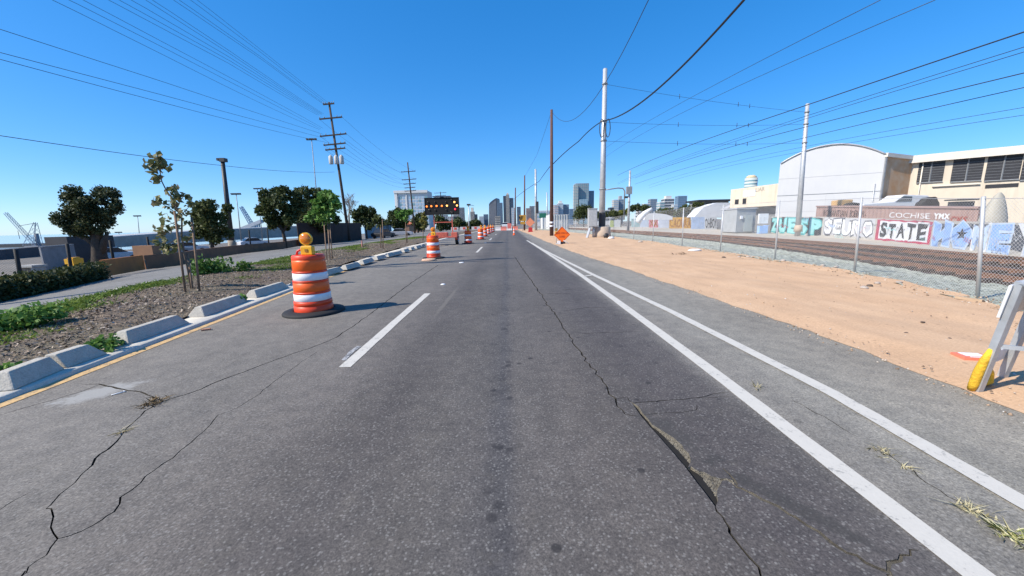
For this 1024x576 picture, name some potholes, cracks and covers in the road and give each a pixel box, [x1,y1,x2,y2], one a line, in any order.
crack [21,265,438,576]
crack [515,257,914,576]
